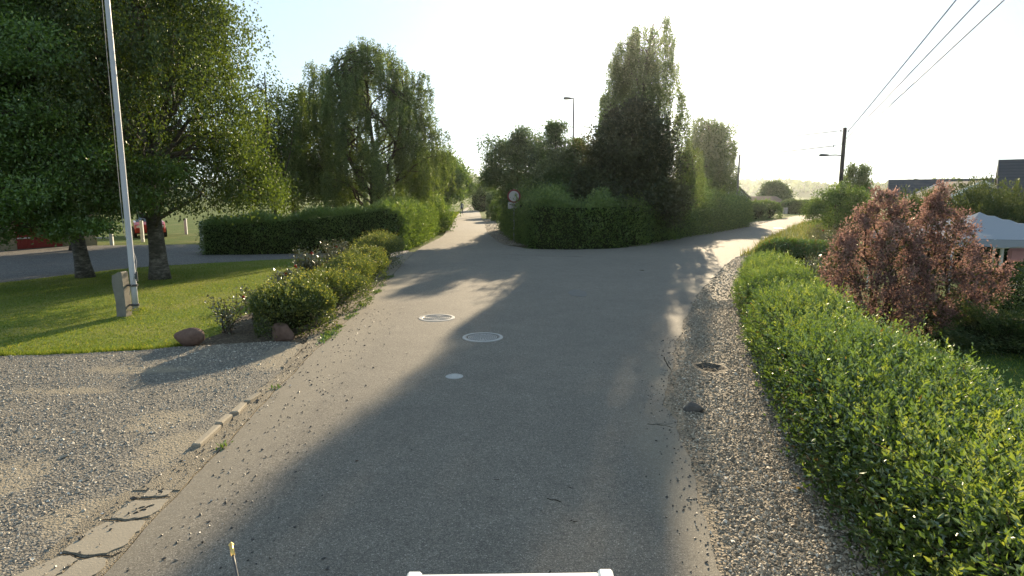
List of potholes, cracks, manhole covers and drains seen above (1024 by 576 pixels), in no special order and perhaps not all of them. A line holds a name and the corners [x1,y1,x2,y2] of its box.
pothole [694,362,728,372]
manhole cover [419,314,455,322]
manhole cover [462,332,503,342]
